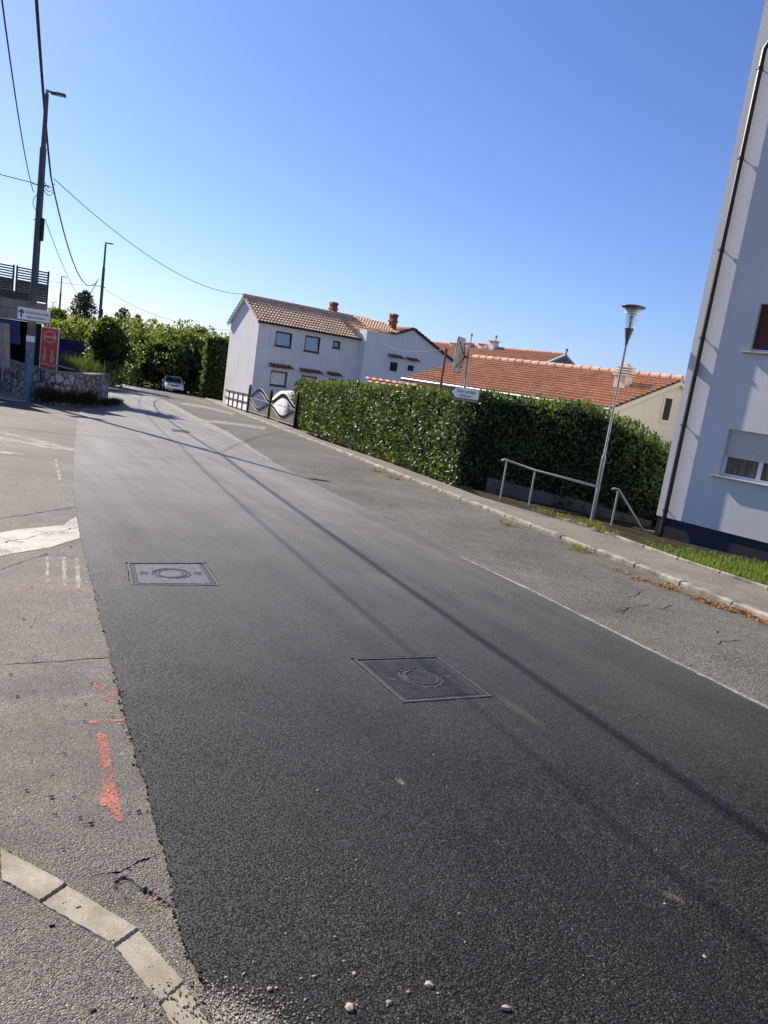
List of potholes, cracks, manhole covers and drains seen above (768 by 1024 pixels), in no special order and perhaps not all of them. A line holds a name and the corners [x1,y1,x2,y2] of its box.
crack [96,855,158,875]
crack [605,577,673,614]
manhole cover [353,656,492,703]
manhole cover [127,563,219,586]
